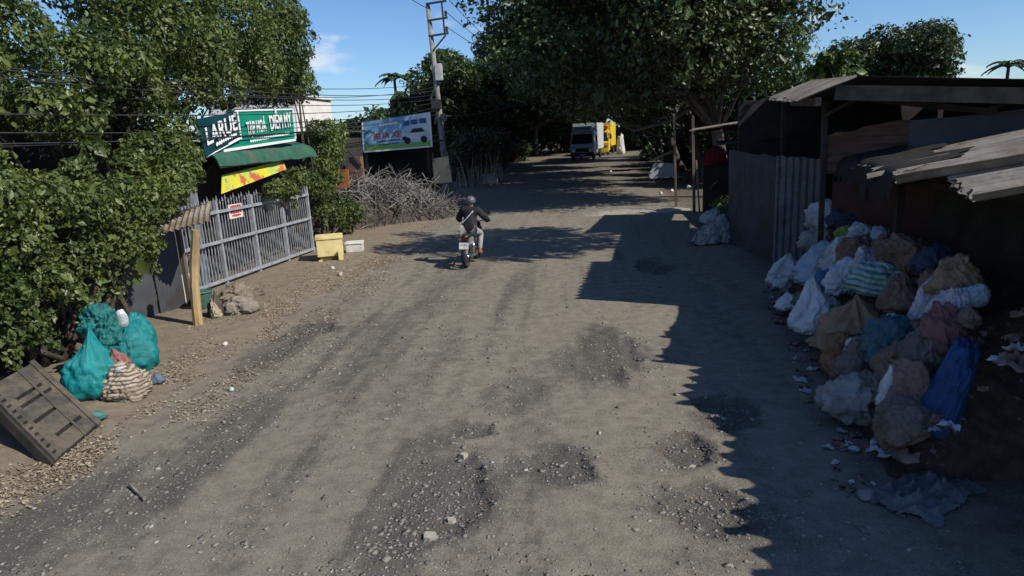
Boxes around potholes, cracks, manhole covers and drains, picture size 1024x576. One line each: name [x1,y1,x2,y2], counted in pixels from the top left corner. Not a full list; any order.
pothole [655,433,715,469]
pothole [349,448,498,562]
pothole [634,258,678,274]
pothole [566,325,651,384]
pothole [445,420,495,439]
pothole [662,485,764,538]
pothole [520,445,599,488]
